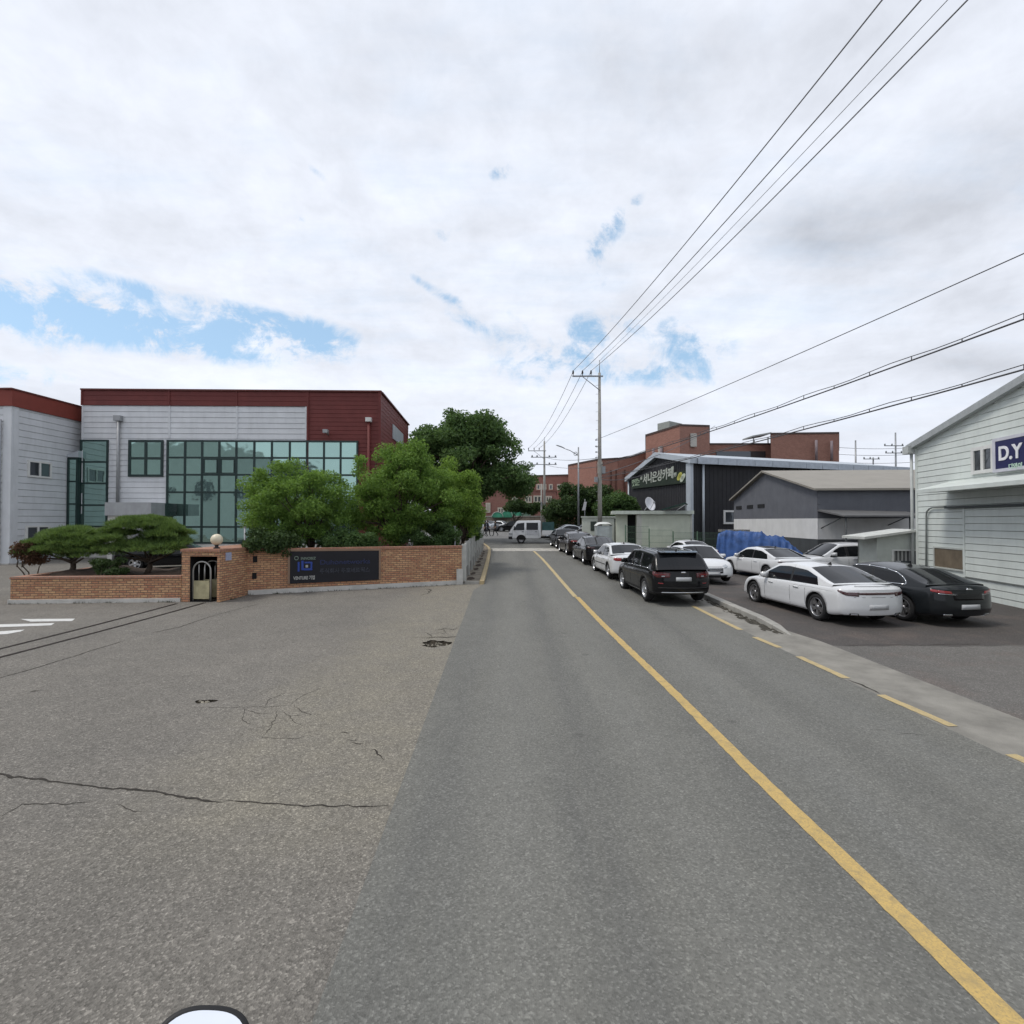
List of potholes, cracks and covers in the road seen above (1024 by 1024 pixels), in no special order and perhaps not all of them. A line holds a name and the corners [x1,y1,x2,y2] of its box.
crack [195,690,324,739]
pothole [422,640,452,648]
crack [0,773,388,816]
